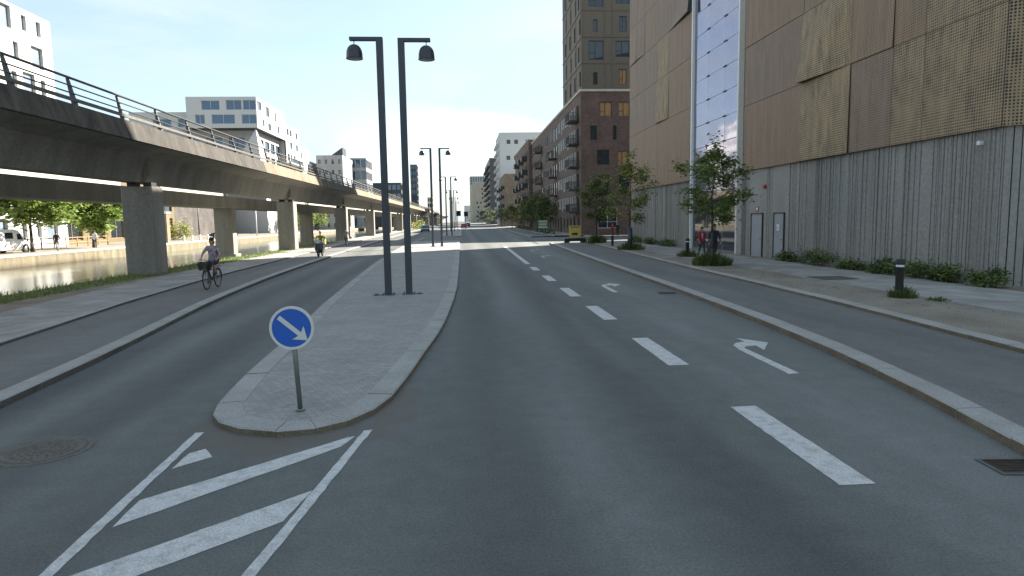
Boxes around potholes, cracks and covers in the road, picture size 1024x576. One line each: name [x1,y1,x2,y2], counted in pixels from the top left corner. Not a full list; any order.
manhole cover [0,435,97,467]
drain grate [975,458,1024,475]
